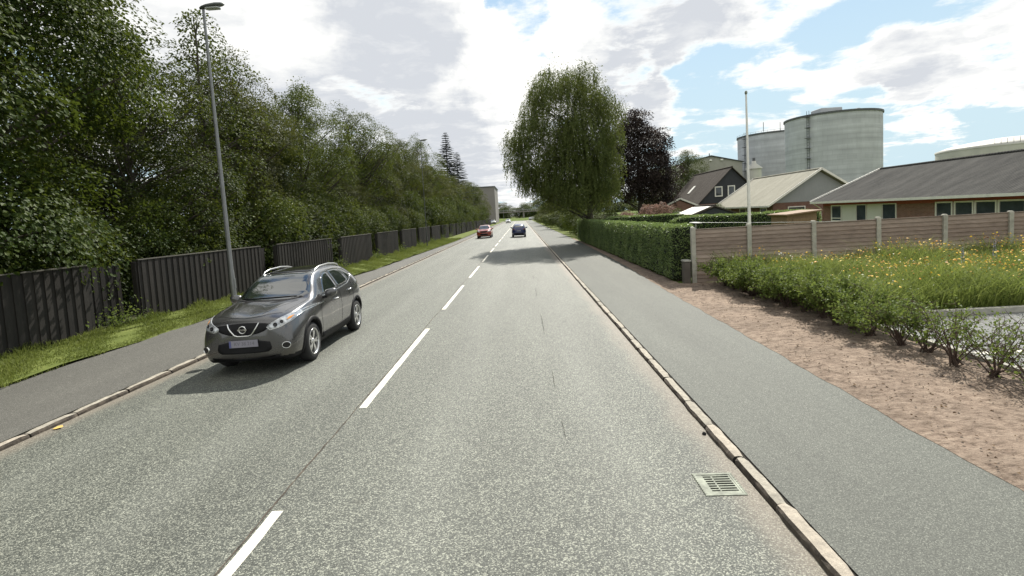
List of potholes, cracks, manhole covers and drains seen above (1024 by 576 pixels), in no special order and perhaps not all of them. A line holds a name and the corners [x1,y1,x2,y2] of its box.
drain grate [692,473,748,496]
